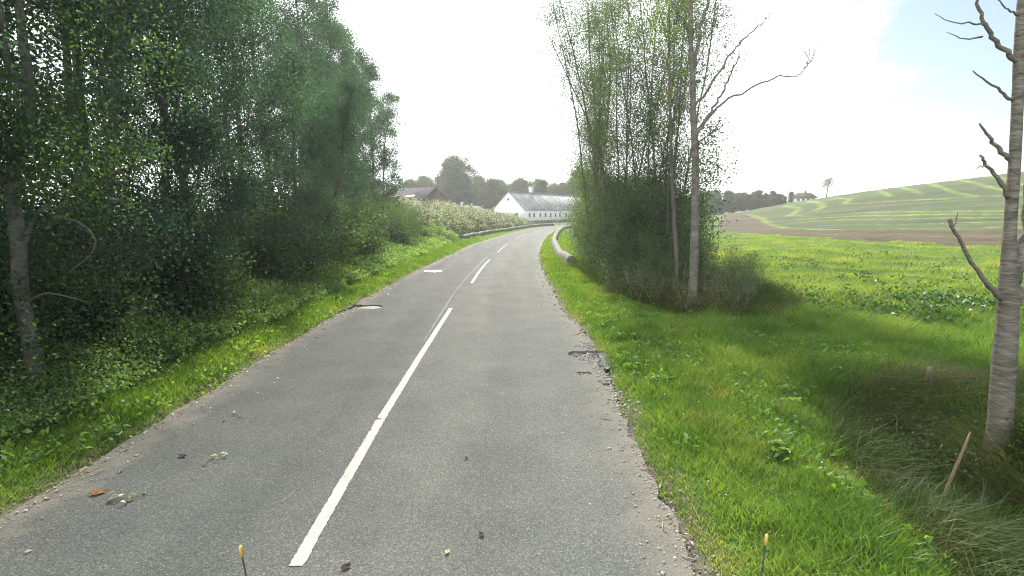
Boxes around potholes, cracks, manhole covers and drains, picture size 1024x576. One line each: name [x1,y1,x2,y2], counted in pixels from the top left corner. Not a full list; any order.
pothole [568,350,611,371]
